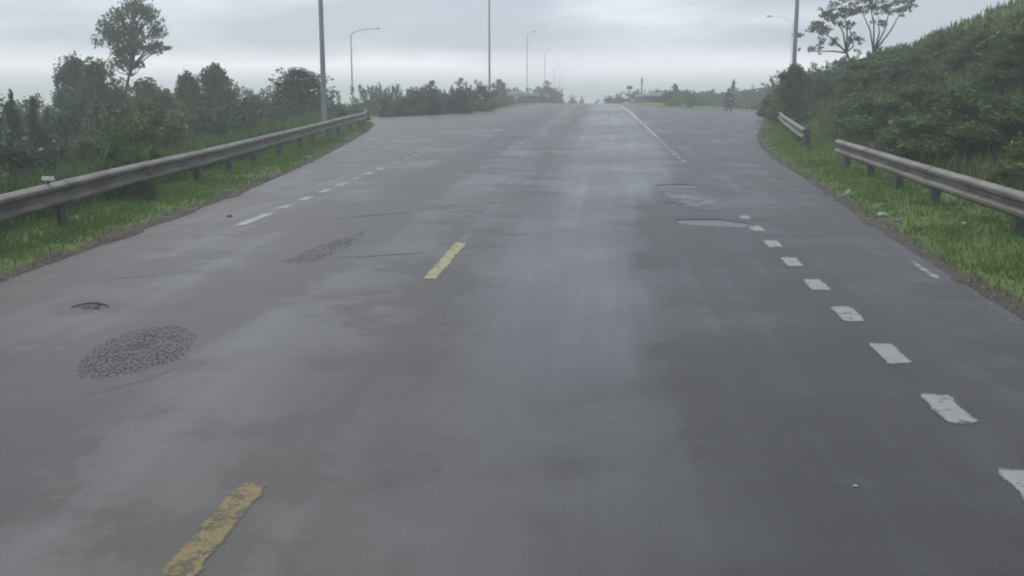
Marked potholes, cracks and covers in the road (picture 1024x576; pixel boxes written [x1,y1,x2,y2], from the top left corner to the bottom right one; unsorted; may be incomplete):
pothole [71,302,110,310]
crack [277,213,422,265]
crack [72,325,200,399]
